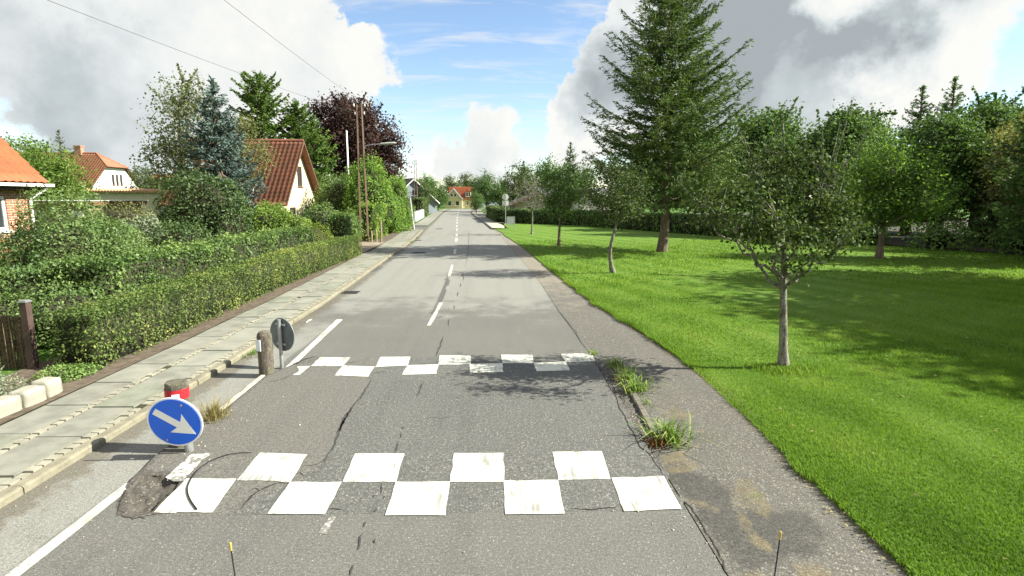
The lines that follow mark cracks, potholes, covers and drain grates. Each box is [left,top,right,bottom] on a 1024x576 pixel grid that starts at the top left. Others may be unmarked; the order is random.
crack [436,232,469,355]
pothole [116,471,188,519]
crack [242,371,384,507]
crack [350,484,385,575]
